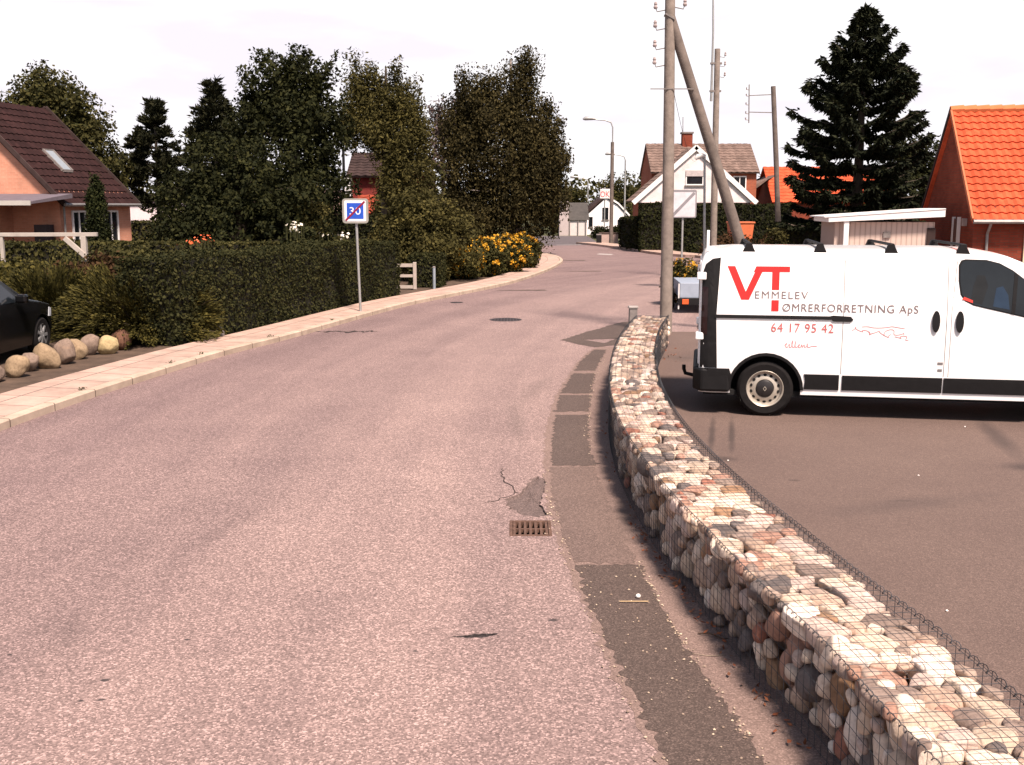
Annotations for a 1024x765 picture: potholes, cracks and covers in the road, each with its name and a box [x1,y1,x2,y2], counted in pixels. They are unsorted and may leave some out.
drain grate [509,520,552,536]
